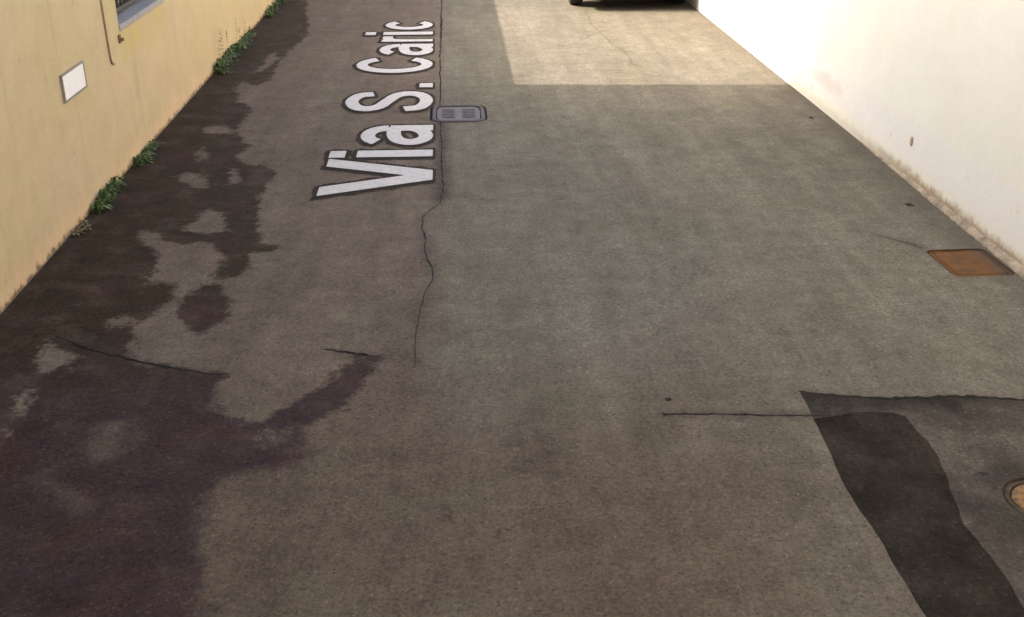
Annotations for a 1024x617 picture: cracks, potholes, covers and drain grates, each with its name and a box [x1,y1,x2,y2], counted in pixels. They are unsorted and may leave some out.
crack [55,336,220,375]
manhole cover [927,248,1015,277]
manhole cover [1002,478,1024,514]
crack [662,391,1024,417]
crack [414,0,444,366]
